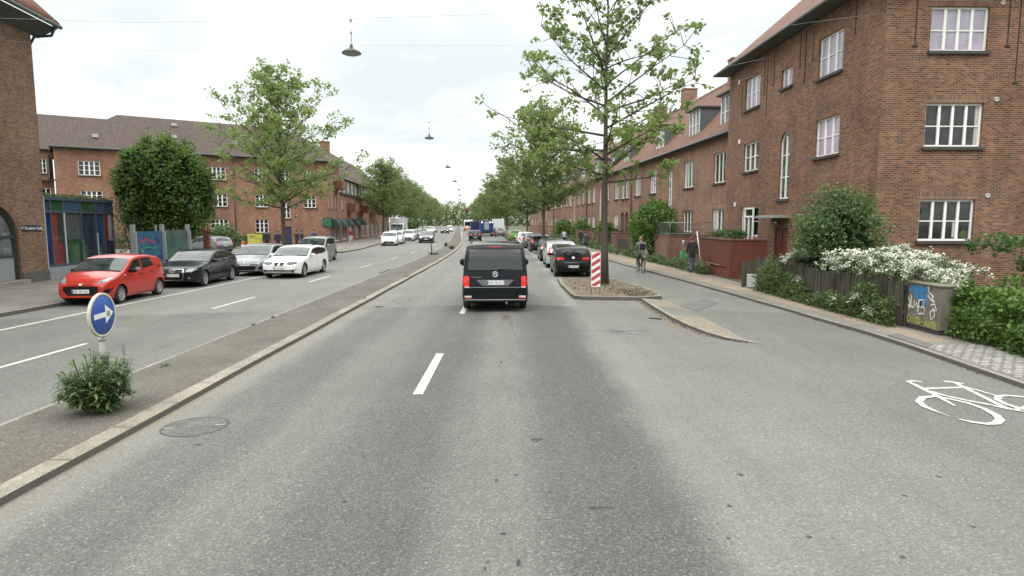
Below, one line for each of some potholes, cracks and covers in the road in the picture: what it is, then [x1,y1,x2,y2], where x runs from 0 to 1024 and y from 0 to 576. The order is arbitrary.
manhole cover [159,417,229,437]
